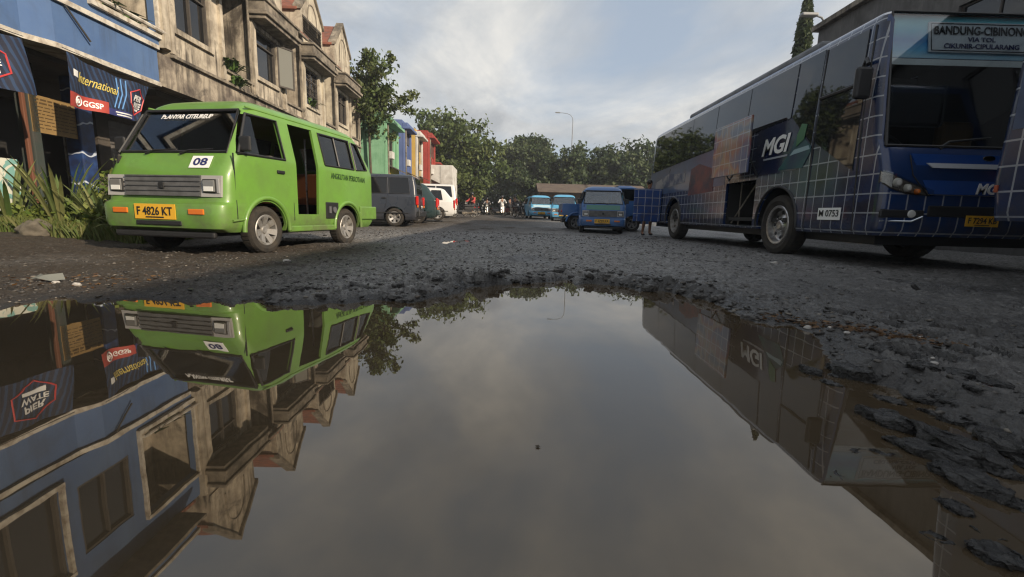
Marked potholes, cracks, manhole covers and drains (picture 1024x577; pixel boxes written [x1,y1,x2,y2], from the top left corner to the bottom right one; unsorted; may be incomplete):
pothole [0,272,1024,577]
